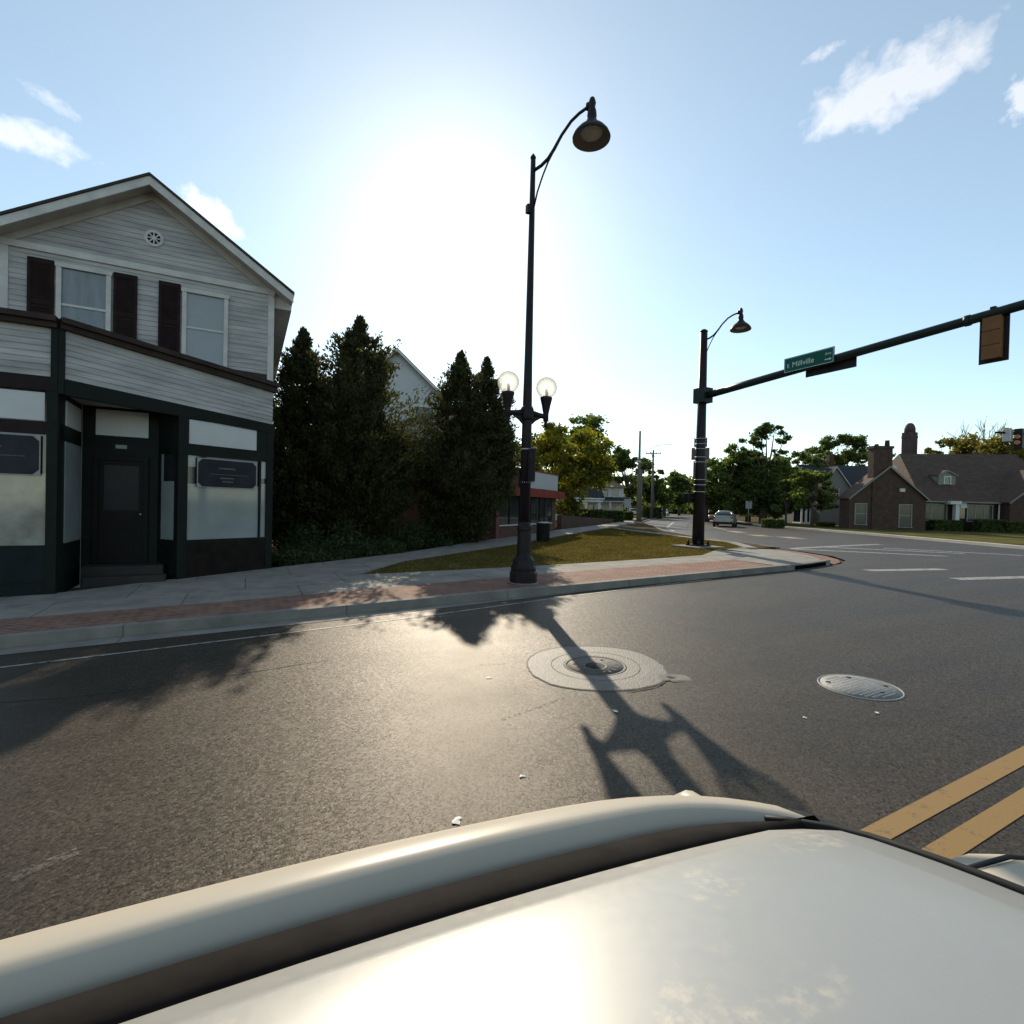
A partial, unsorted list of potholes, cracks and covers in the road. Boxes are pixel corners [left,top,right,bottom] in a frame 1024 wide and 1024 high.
manhole cover [817,674,906,701]
manhole cover [526,646,668,692]
